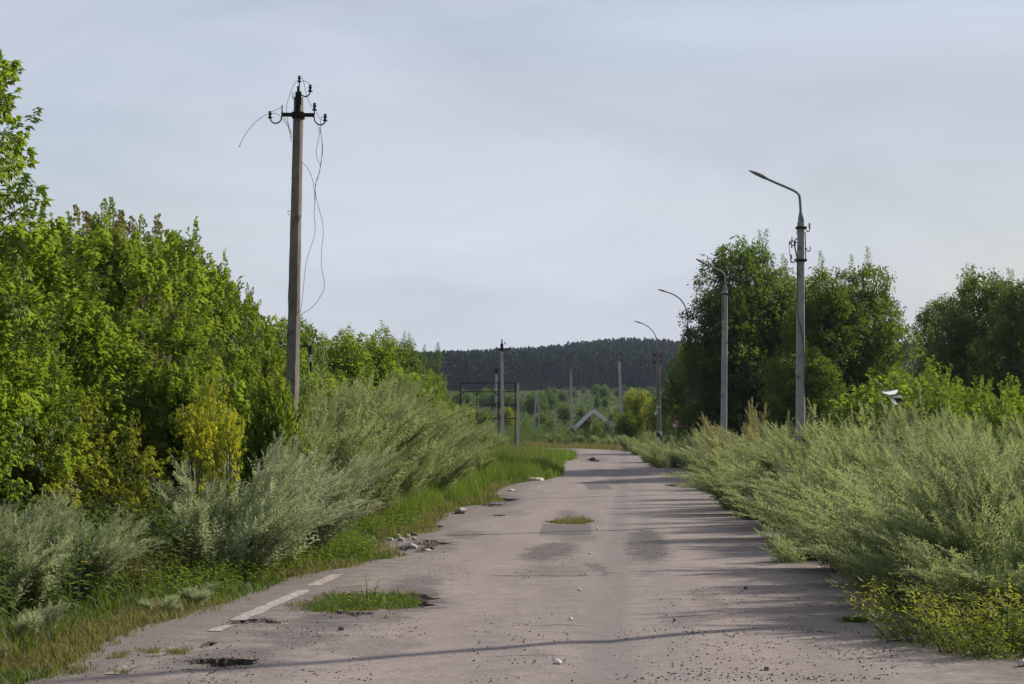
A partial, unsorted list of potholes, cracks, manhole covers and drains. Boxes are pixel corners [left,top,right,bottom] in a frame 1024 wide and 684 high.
pothole [294,593,442,613]
pothole [187,658,257,667]
